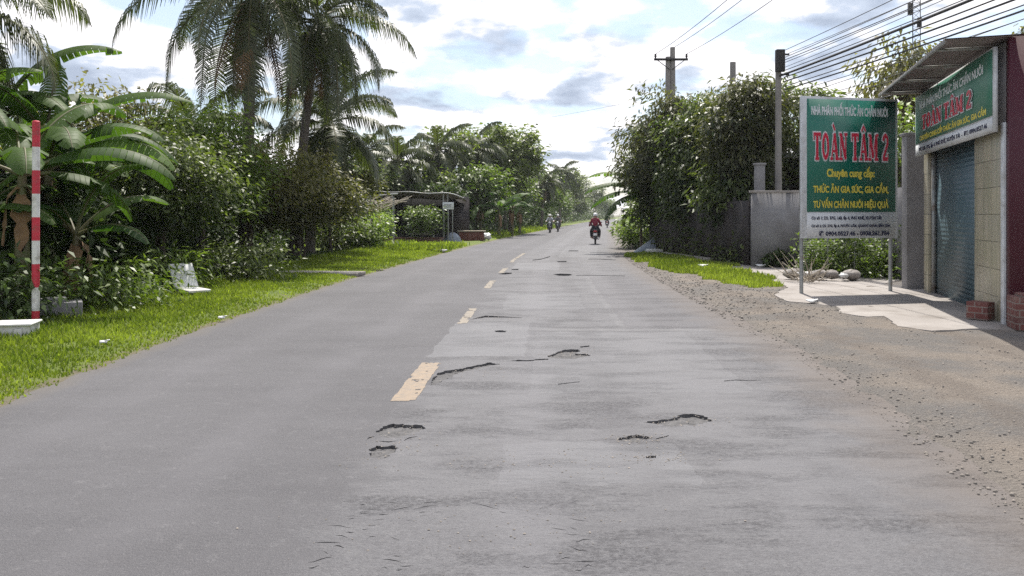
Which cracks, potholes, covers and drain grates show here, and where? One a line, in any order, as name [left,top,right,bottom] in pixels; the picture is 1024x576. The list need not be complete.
pothole [548,346,590,359]
pothole [368,424,426,459]
pothole [645,414,712,427]
pothole [431,359,549,385]
